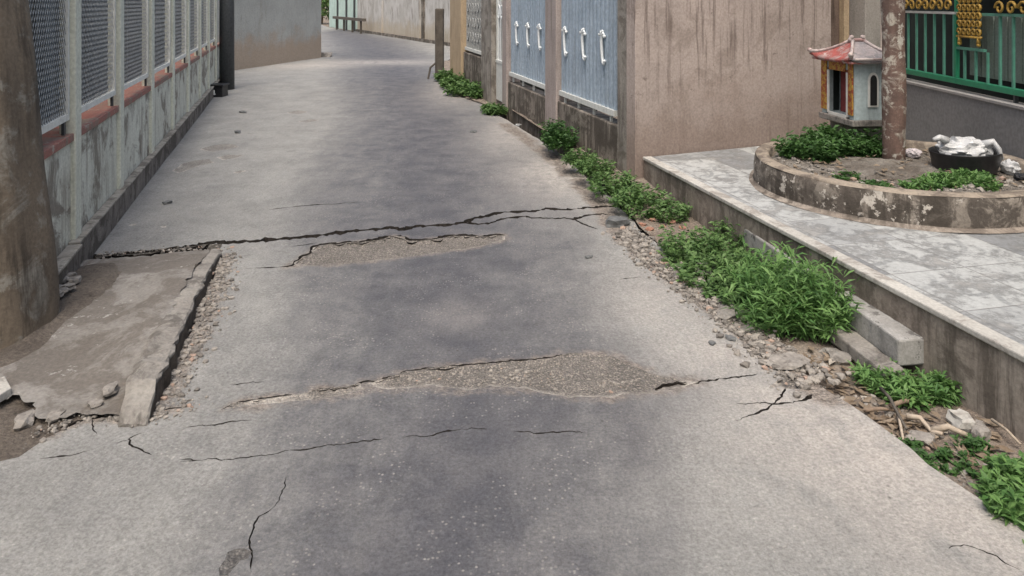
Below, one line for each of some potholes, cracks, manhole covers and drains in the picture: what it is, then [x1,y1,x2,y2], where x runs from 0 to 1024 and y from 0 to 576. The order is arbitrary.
crack [118,433,151,455]
crack [93,205,632,269]
crack [655,374,812,422]
crack [178,439,381,462]
pothole [294,235,505,266]
crack [248,479,286,569]
crack [949,544,1020,570]
crack [403,427,484,438]
crack [67,415,114,434]
pothole [369,353,697,398]
